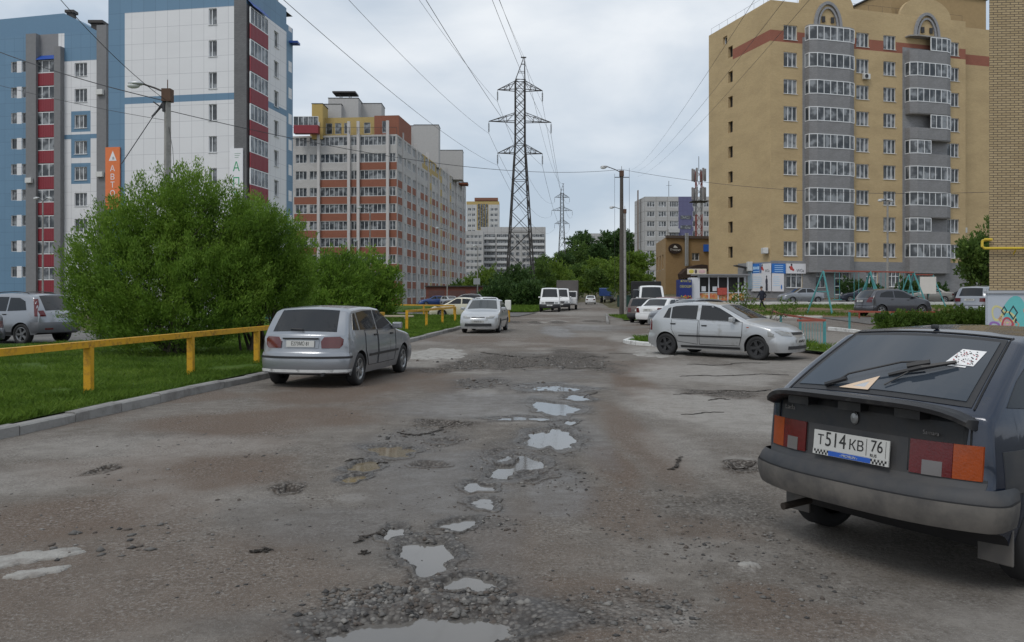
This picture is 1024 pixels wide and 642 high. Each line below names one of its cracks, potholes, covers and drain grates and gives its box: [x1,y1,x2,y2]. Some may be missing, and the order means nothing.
pothole [509,382,602,393]
pothole [428,568,508,595]
pothole [512,421,590,454]
pothole [478,354,545,370]
pothole [269,482,306,496]
pothole [722,459,759,473]
pothole [356,443,426,461]
pothole [333,471,375,485]
pothole [274,592,585,642]
pothole [457,493,503,513]
pothole [336,456,390,474]
pothole [80,464,121,476]
